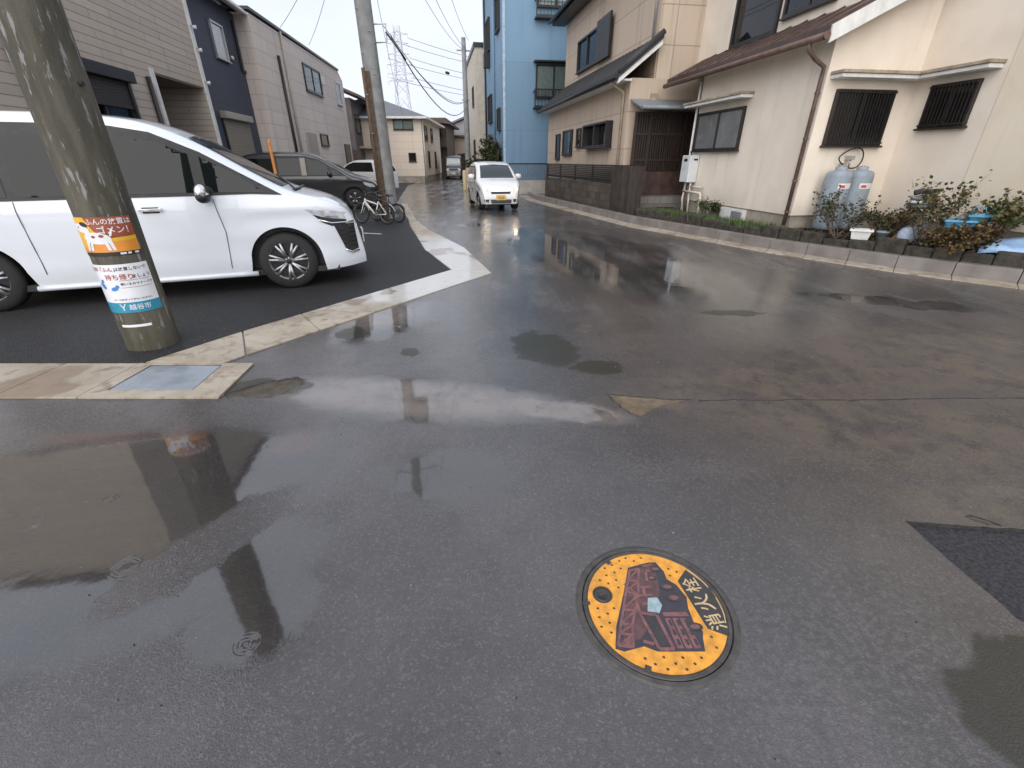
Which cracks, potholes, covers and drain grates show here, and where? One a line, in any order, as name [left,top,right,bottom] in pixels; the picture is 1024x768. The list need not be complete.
manhole cover [575,547,741,691]
